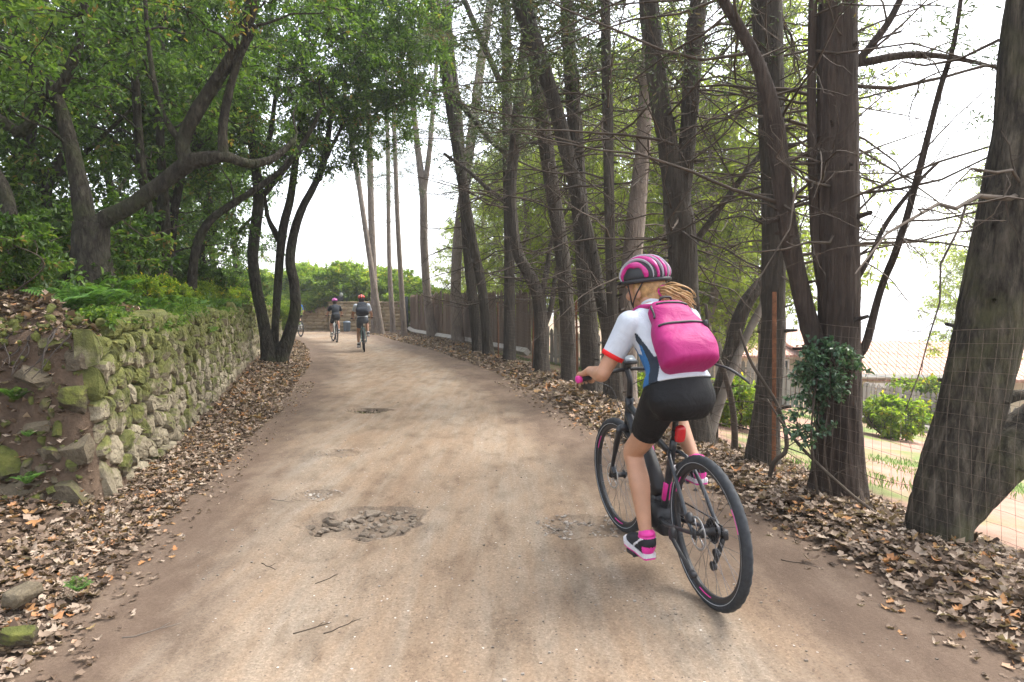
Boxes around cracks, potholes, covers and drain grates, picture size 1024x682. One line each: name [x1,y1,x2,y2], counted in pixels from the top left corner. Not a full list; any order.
pothole [291,489,347,502]
pothole [536,513,621,540]
pothole [314,448,363,458]
pothole [294,505,434,544]
